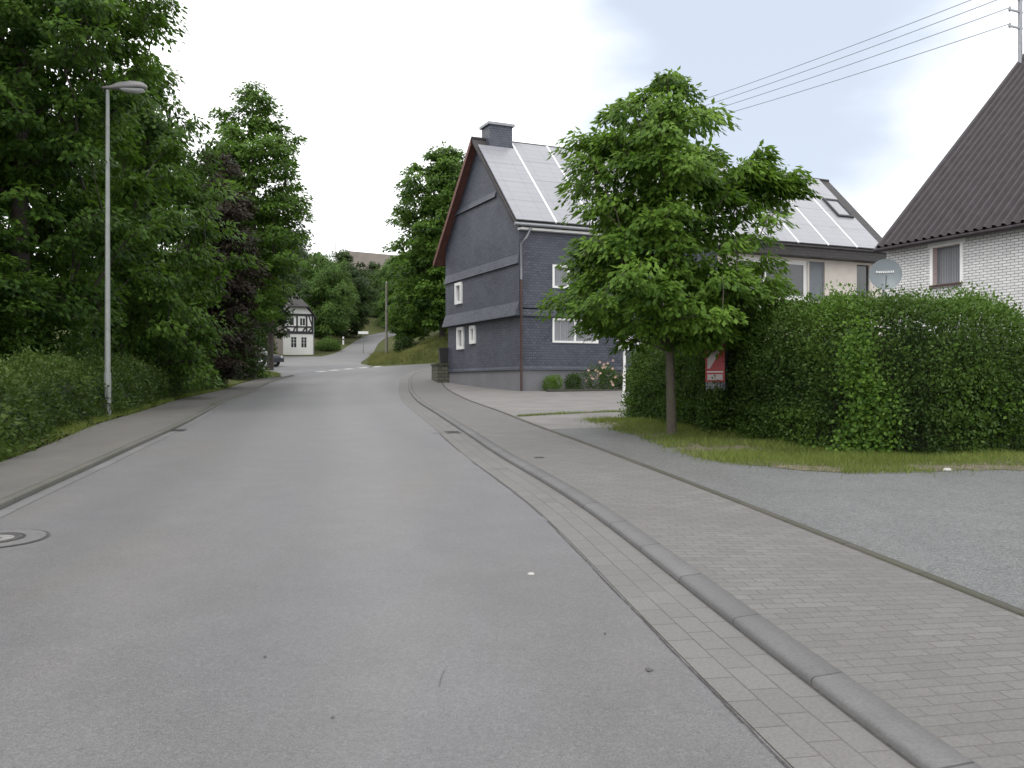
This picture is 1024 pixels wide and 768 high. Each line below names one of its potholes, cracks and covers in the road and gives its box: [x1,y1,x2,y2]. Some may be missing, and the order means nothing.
manhole cover [0,529,50,548]
